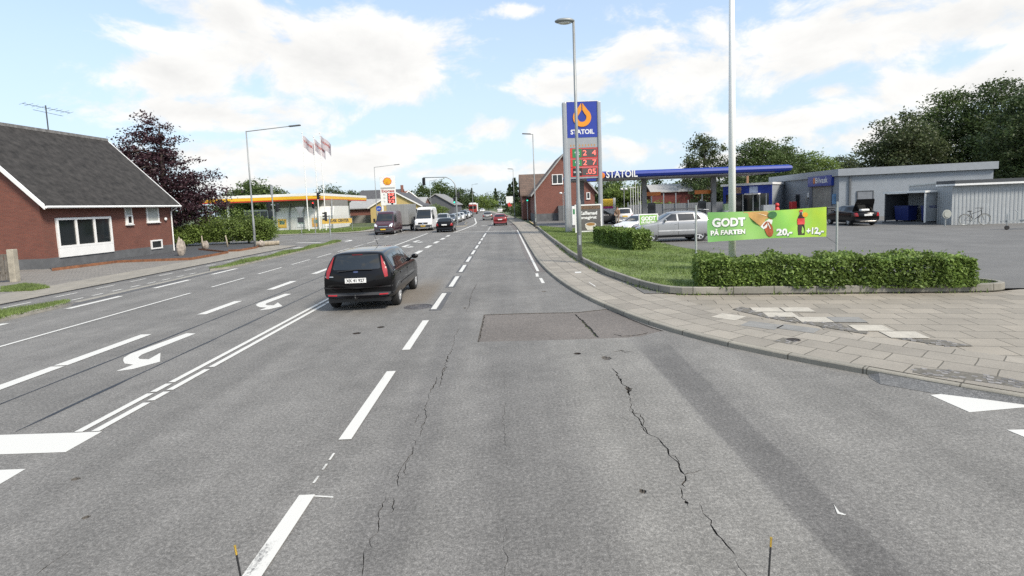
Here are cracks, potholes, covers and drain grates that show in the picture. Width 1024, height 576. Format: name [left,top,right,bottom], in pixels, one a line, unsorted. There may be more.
crack [575,314,747,576]
crack [362,286,476,575]
